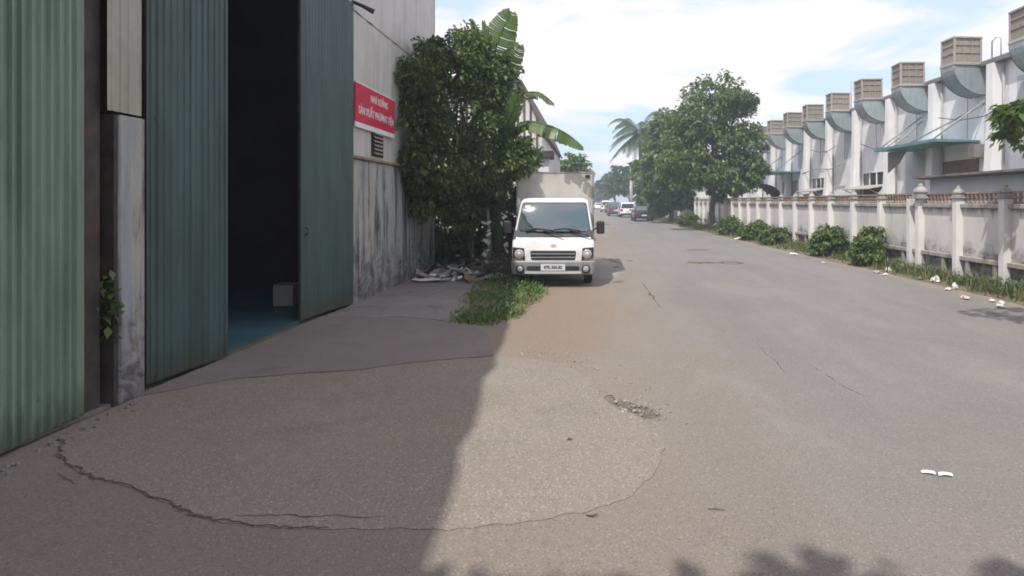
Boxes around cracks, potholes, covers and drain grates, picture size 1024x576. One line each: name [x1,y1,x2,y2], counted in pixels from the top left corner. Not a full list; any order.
crack [56,440,384,528]
pothole [603,395,662,420]
